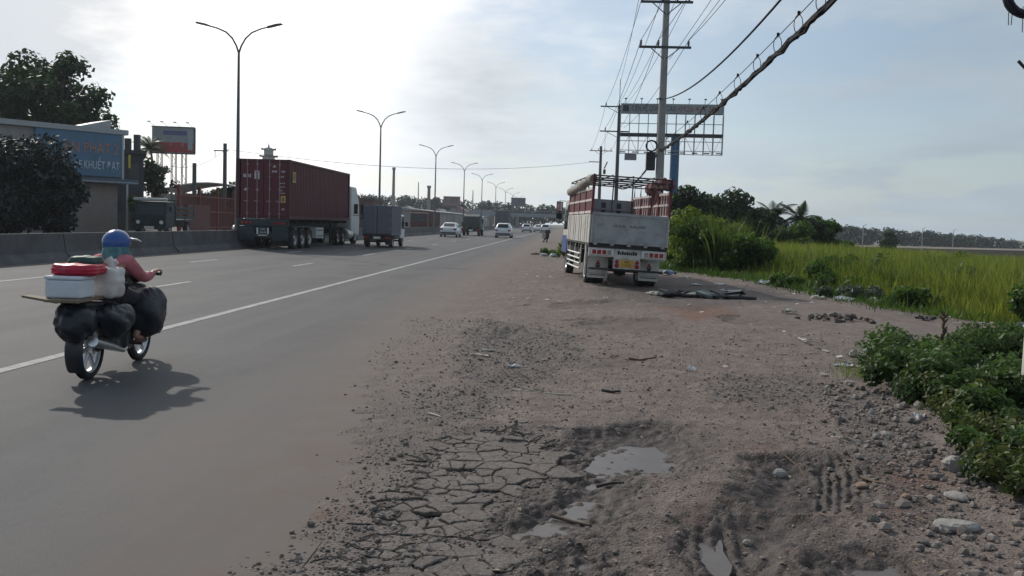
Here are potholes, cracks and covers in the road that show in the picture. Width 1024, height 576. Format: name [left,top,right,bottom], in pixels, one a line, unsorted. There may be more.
pothole [680,506,816,576]
pothole [496,424,700,546]
crack [313,417,568,576]
